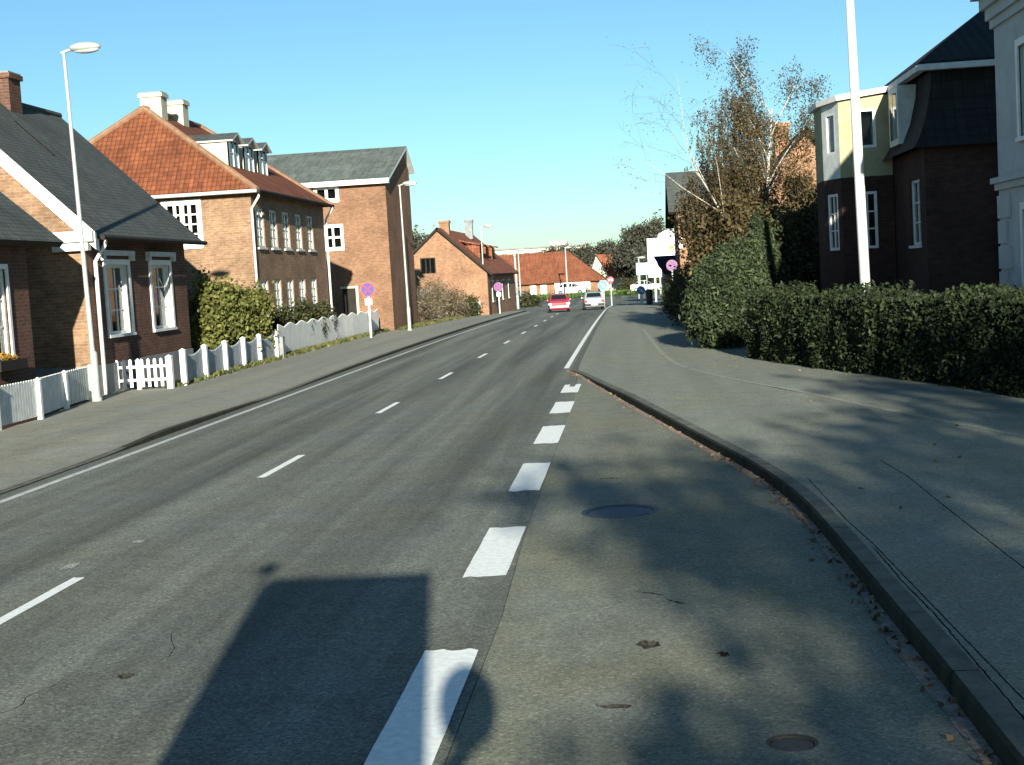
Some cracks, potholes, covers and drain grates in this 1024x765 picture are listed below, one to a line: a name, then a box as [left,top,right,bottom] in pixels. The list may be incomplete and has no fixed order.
manhole cover [766,734,819,751]
manhole cover [581,505,659,518]
pothole [636,640,661,649]
